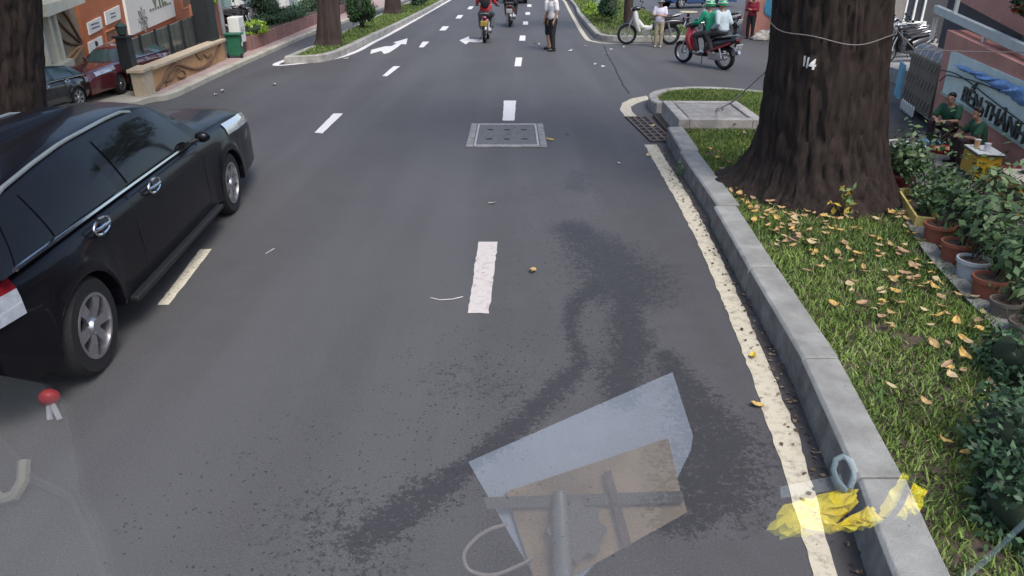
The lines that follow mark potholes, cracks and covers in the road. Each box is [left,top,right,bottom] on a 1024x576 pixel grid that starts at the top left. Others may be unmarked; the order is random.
manhole cover [466,123,547,147]
drain grate [625,116,667,142]
crack [604,46,631,94]
